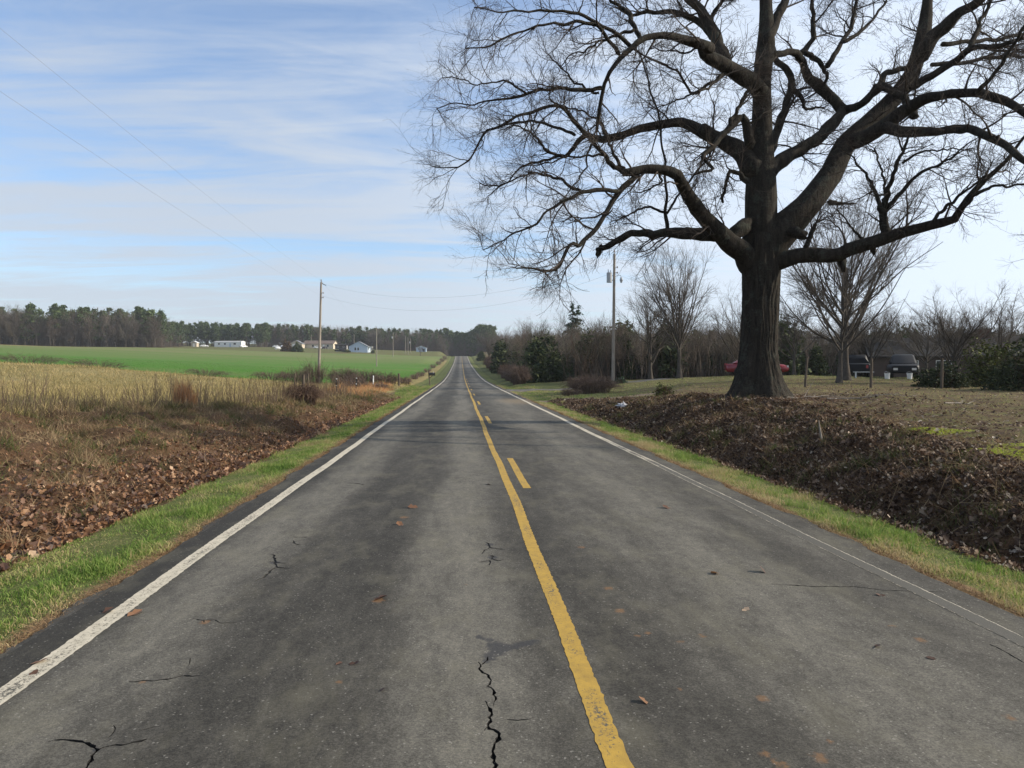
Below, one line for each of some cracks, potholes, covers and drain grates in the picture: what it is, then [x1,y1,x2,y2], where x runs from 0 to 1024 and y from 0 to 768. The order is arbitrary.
crack [49,725,156,768]
crack [256,541,299,581]
crack [478,657,531,768]
crack [129,658,200,682]
crack [776,584,933,592]
